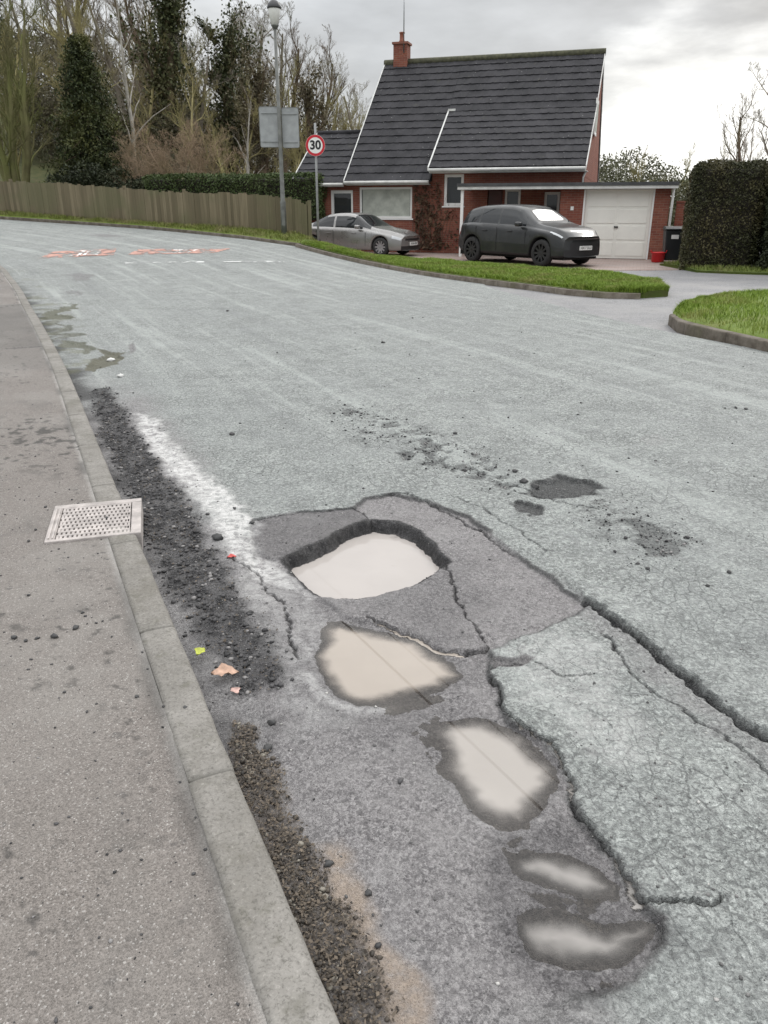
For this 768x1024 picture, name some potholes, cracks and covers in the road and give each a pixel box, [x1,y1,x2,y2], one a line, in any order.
pothole [306,619,471,711]
pothole [501,899,673,979]
pothole [425,712,568,839]
pothole [279,518,453,600]
pothole [497,843,630,915]
crack [250,468,768,913]
